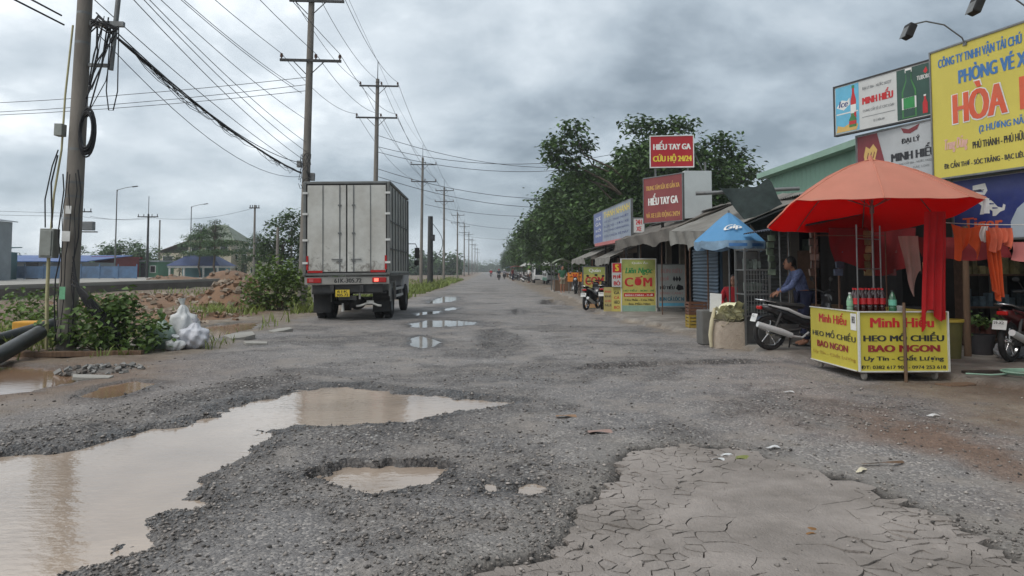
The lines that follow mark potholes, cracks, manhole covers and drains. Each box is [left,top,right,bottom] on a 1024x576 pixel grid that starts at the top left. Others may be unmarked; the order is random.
crack [547,453,759,576]
pothole [403,319,483,328]
pothole [404,335,446,349]
pothole [424,296,460,304]
pothole [508,478,556,496]
pothole [0,382,529,576]
